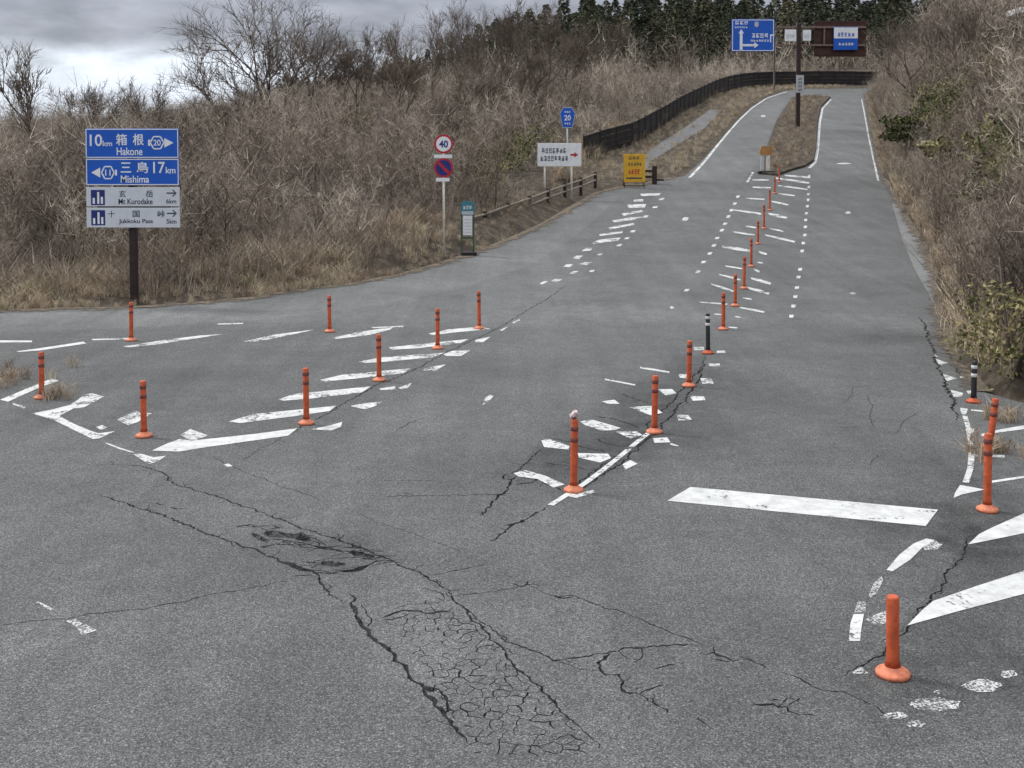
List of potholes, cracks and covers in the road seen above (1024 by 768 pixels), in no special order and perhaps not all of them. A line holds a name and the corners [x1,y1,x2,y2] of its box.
pothole [283,561,316,573]
crack [0,461,894,756]
crack [382,394,651,541]
pothole [263,530,313,542]
